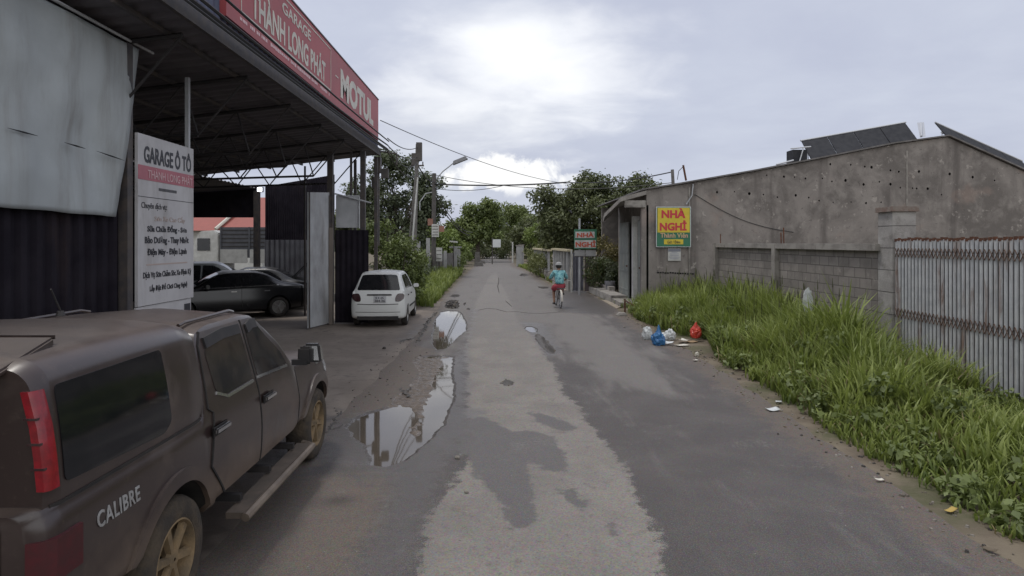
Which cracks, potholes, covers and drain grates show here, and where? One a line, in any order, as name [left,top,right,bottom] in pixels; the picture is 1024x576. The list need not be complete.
pothole [445,300,460,309]
pothole [431,310,468,350]
pothole [343,355,457,467]
